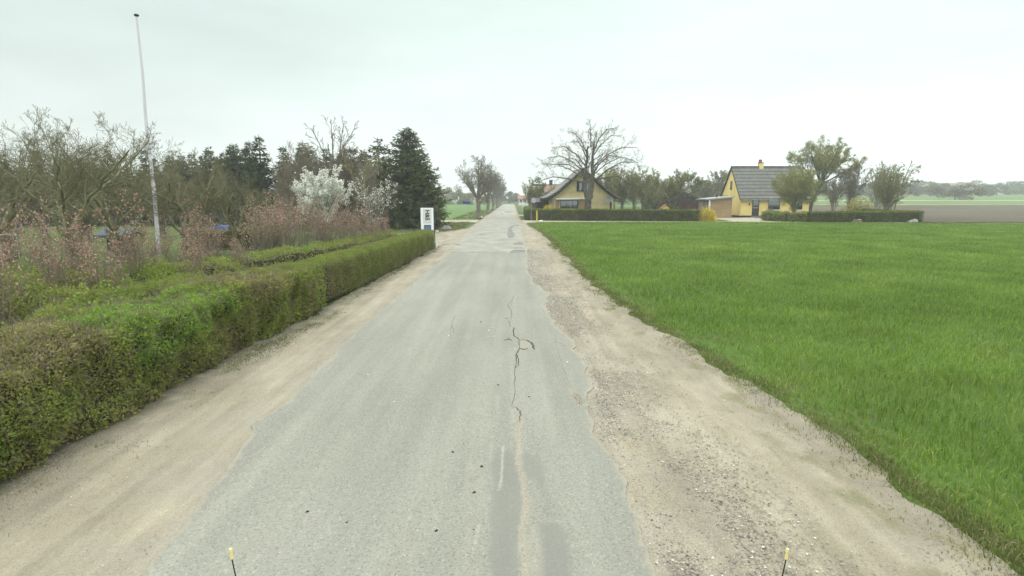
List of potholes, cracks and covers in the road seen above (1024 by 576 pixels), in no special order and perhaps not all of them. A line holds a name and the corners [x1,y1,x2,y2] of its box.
crack [504,296,535,576]
